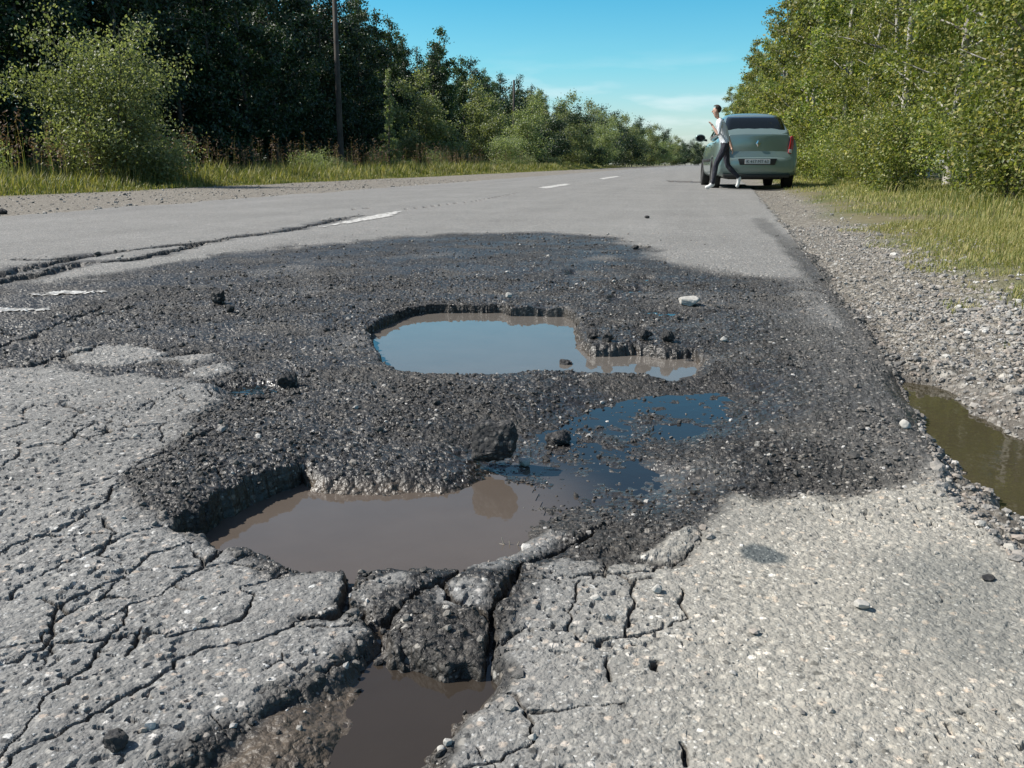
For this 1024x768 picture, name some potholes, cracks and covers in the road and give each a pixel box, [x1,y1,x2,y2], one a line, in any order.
pothole [363,302,712,381]
crack [0,371,703,768]
pothole [162,455,551,584]
crack [0,207,371,285]
